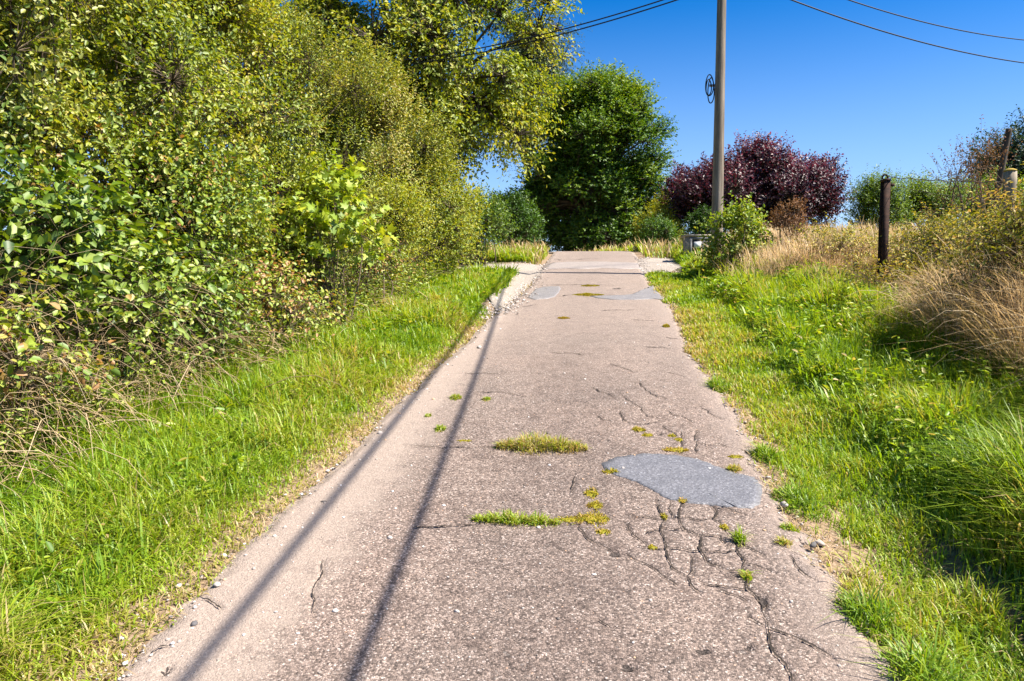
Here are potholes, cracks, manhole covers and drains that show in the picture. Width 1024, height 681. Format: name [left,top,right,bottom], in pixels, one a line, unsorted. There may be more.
crack [311,559,323,615]
crack [578,502,834,681]
crack [594,364,725,453]
